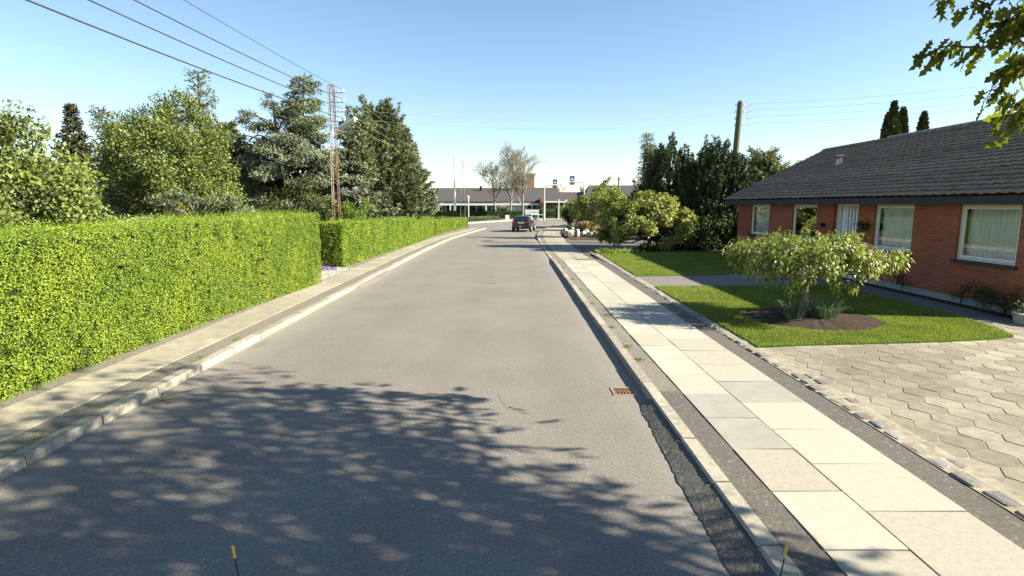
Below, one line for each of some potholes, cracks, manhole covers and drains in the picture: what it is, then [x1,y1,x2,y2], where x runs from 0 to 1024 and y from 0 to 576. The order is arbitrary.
drain grate [609,387,638,396]
